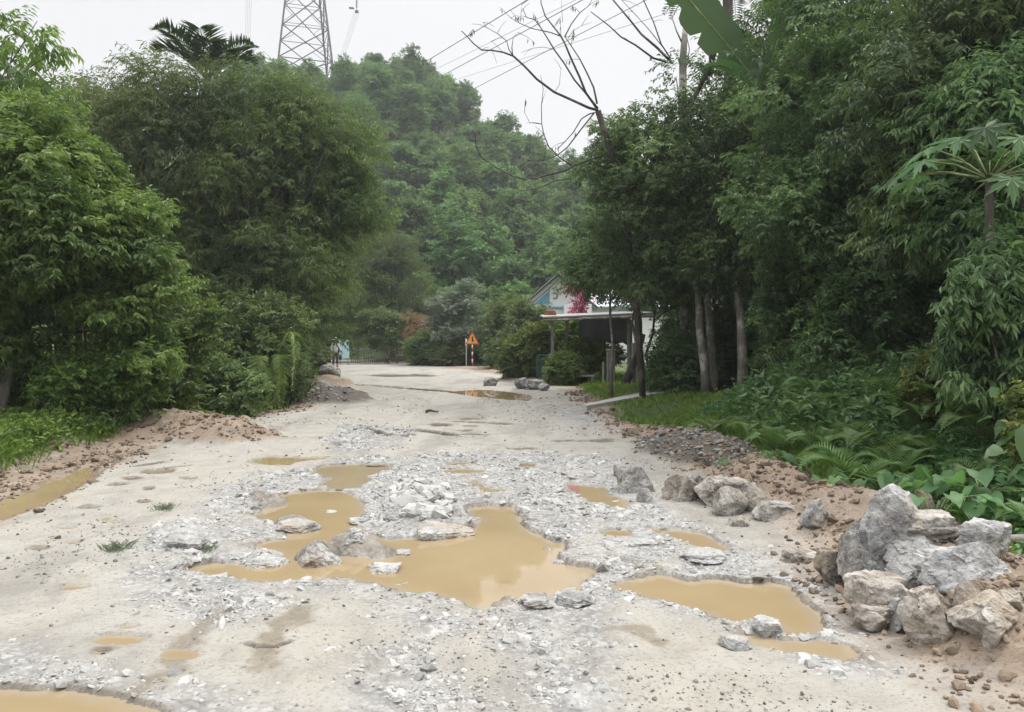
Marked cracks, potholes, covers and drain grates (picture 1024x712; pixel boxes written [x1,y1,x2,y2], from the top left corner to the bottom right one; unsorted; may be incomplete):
pothole [78,630,158,646]
pothole [244,455,338,466]
pothole [554,478,639,509]
pothole [0,674,194,712]
pothole [410,388,538,402]
pothole [154,647,205,661]
pothole [599,565,846,638]
pothole [437,466,500,475]
pothole [307,462,399,491]
pothole [623,522,744,553]
pothole [0,465,108,523]
pothole [719,628,881,666]
